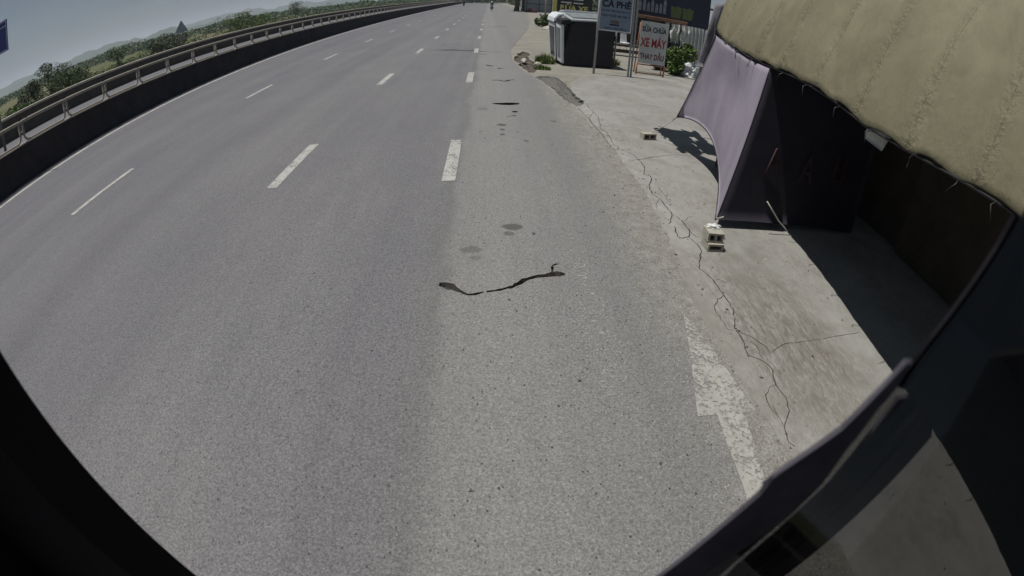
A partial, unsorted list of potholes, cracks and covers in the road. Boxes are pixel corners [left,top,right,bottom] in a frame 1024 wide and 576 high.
crack [578,103,859,447]
crack [440,263,564,295]
pothole [514,52,536,72]
pothole [536,76,585,106]
